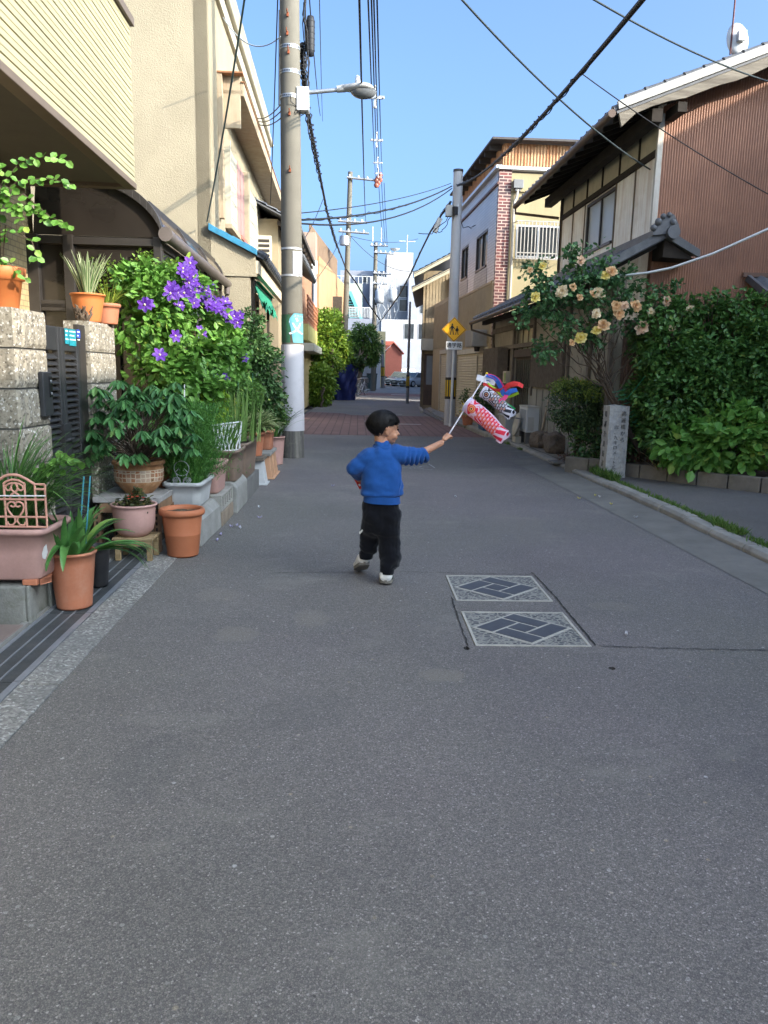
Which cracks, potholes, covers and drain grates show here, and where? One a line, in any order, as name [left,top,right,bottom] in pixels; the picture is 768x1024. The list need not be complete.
drain grate [0,612,92,683]
drain grate [0,681,21,703]
manhole cover [461,611,592,647]
manhole cover [445,575,553,602]
